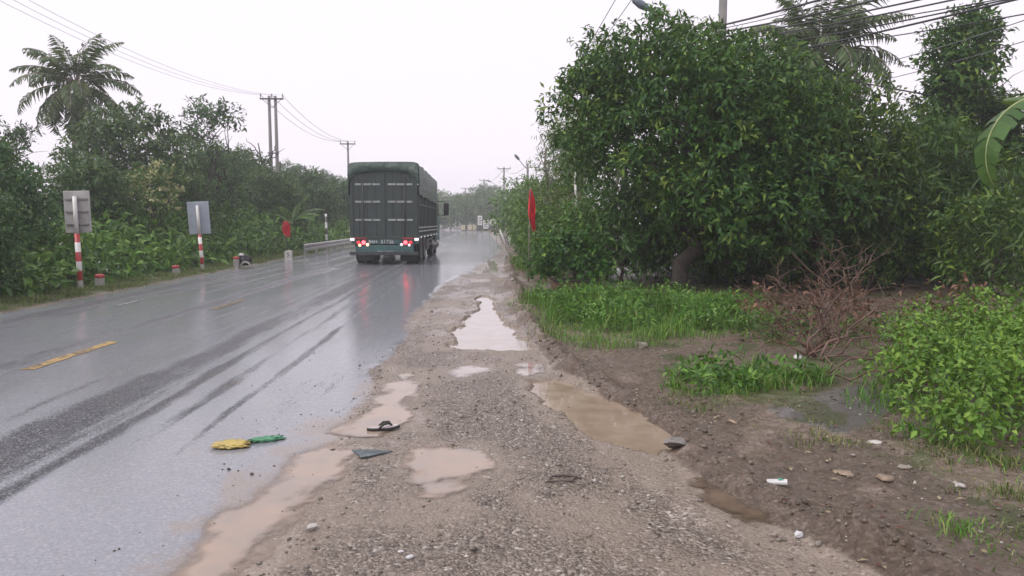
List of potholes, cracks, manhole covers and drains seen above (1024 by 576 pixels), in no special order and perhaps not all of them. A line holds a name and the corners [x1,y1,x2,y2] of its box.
pothole [371,439,517,506]
pothole [439,294,543,354]
pothole [499,358,559,378]
pothole [426,361,510,380]
pothole [507,373,710,462]
pothole [312,367,436,447]
